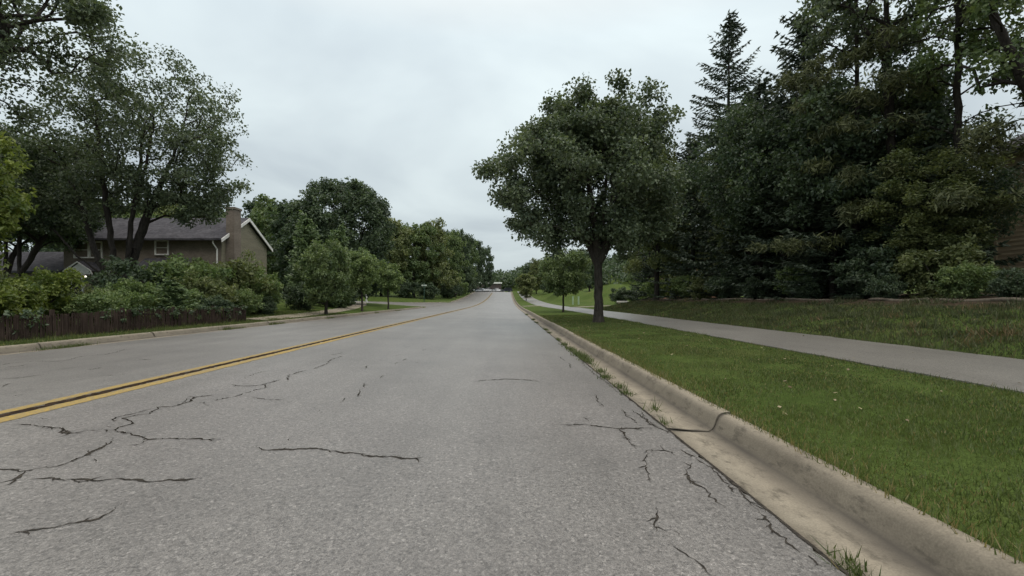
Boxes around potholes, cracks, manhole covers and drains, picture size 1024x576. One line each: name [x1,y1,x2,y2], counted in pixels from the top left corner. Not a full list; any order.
crack [0,293,492,486]
crack [562,363,818,565]
crack [11,501,127,535]
